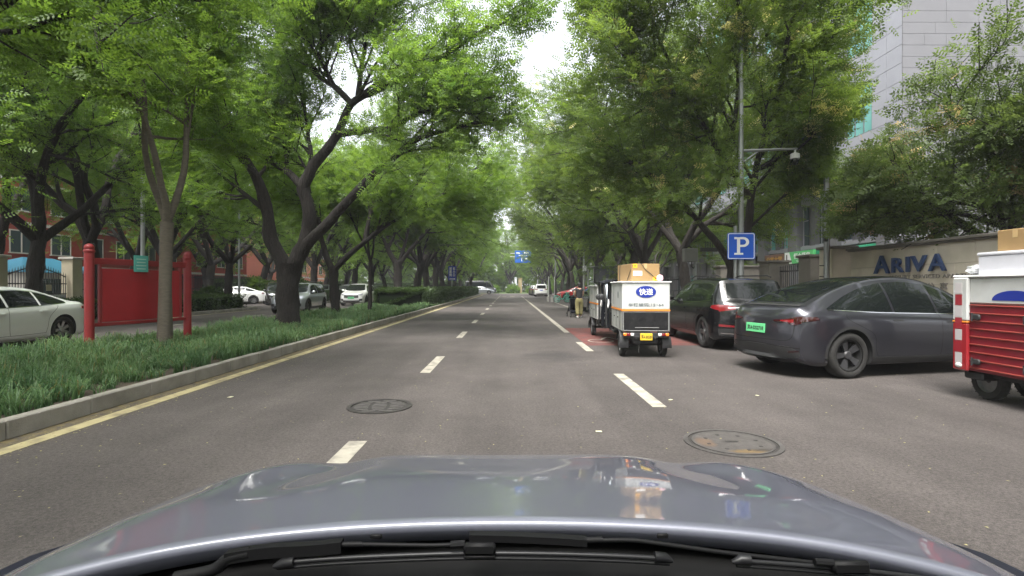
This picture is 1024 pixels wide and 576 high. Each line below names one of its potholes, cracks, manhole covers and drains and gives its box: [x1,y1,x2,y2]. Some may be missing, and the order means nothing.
manhole cover [346,399,412,414]
manhole cover [683,429,785,458]
